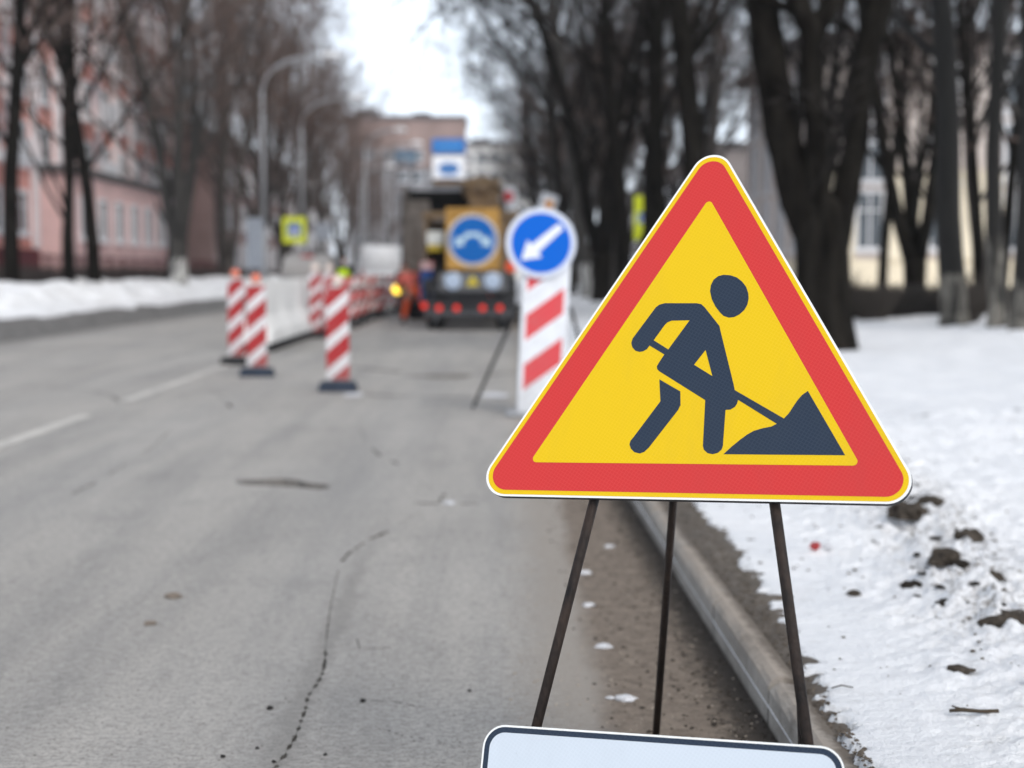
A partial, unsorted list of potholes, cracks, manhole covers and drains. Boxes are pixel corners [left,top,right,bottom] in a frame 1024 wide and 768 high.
crack [274,512,420,768]
